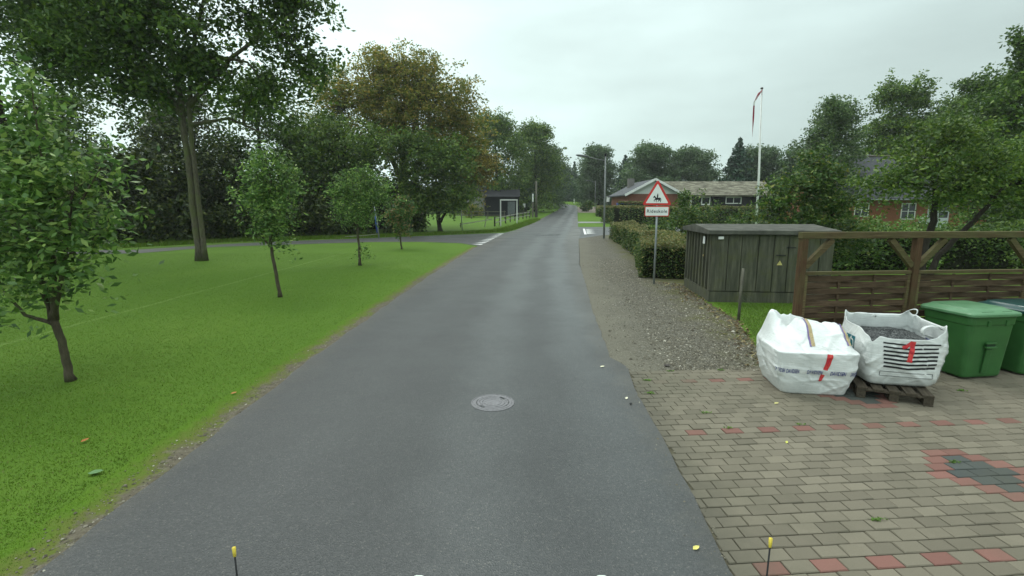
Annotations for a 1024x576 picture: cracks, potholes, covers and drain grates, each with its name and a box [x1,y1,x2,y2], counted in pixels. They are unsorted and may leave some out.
manhole cover [471,394,514,412]
